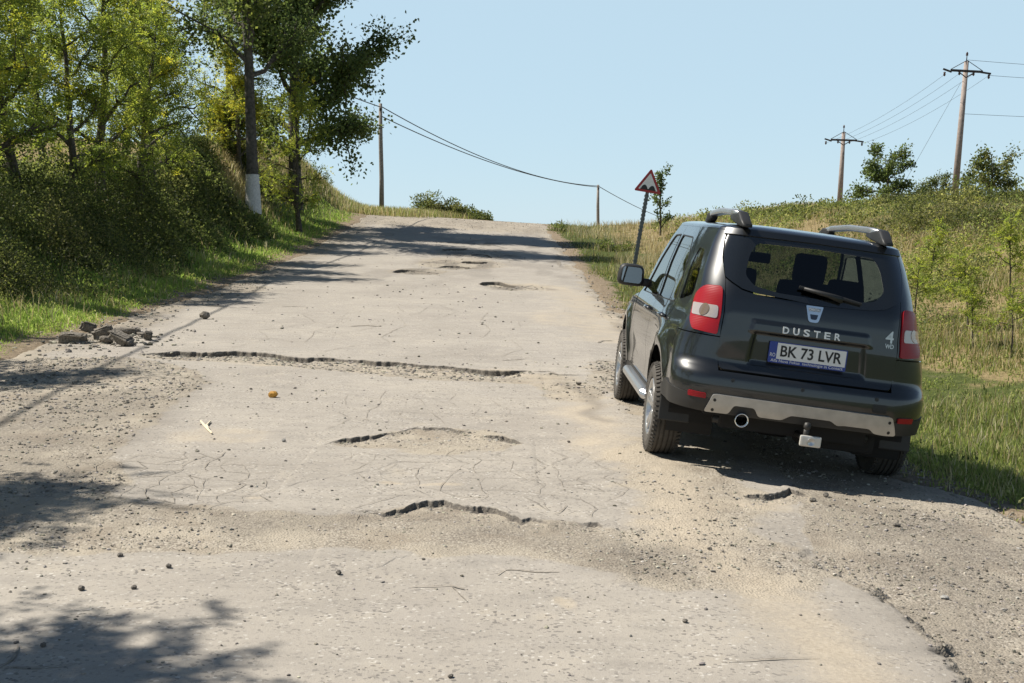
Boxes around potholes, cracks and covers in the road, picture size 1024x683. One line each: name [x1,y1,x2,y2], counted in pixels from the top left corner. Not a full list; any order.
pothole [472,281,523,294]
pothole [52,349,547,405]
crack [332,449,629,517]
pothole [382,269,446,278]
crack [332,392,510,429]
